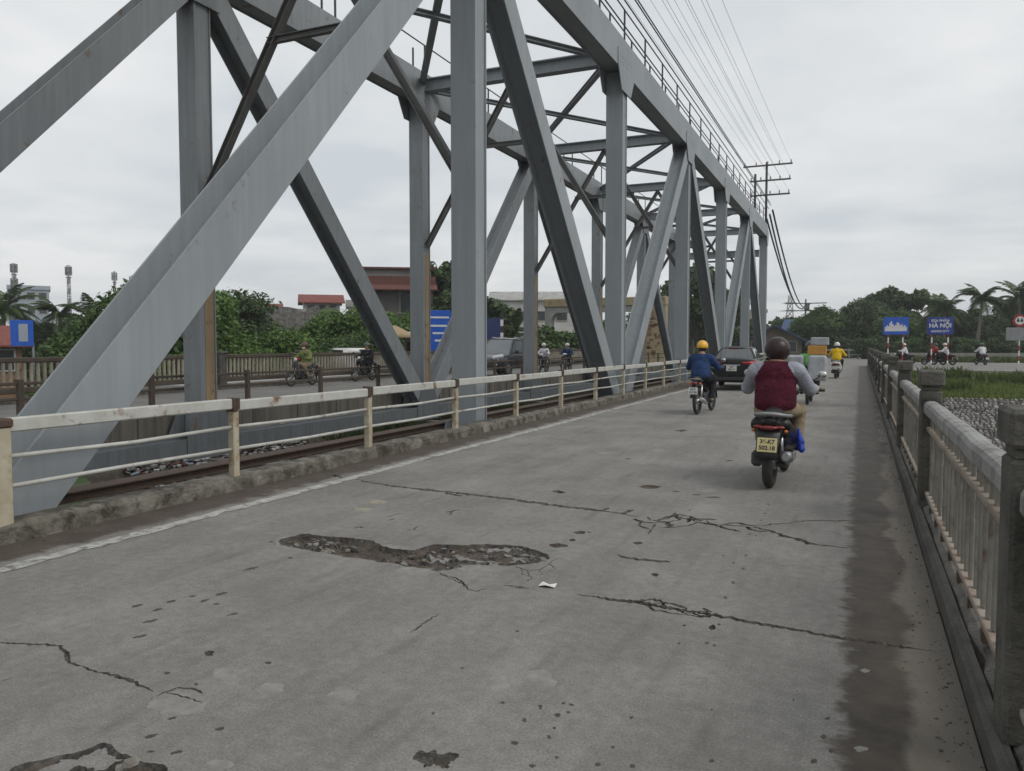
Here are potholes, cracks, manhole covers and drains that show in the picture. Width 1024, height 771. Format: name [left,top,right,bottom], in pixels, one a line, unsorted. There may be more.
crack [577,594,935,652]
pothole [9,743,168,771]
crack [617,554,670,563]
crack [0,642,203,704]
pothole [278,534,550,572]
crack [334,475,865,548]
crack [440,559,555,592]
pothole [413,750,459,769]
